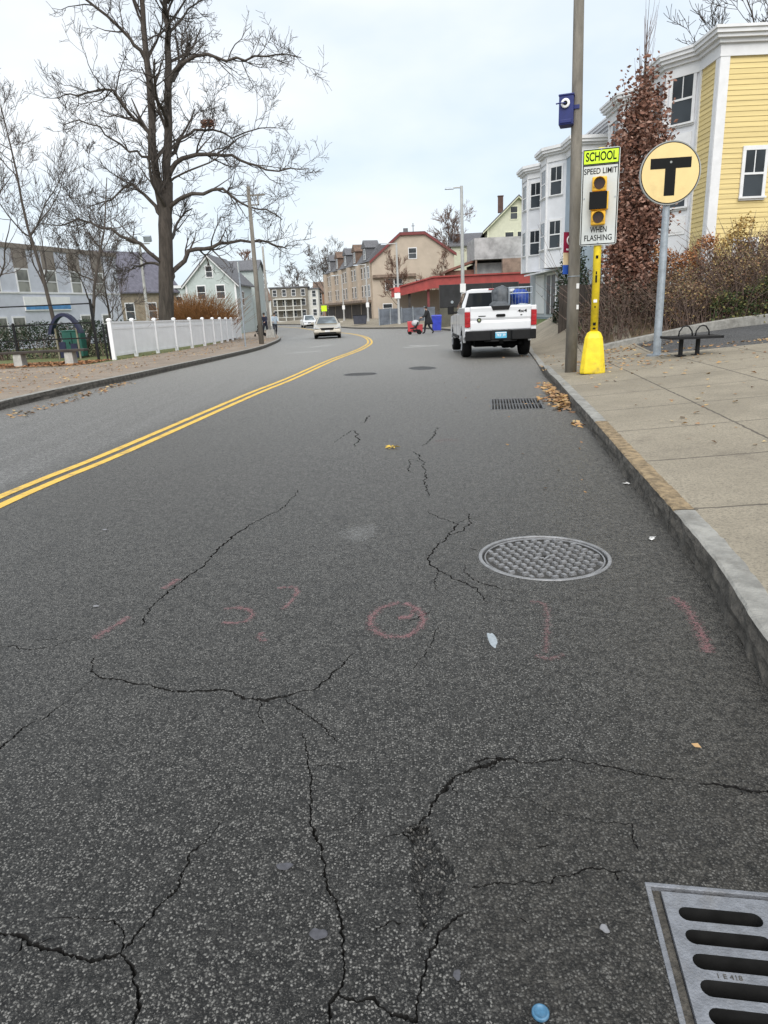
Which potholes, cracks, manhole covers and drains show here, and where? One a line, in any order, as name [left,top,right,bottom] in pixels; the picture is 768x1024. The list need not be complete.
crack [407,610,439,675]
manhole cover [479,536,612,581]
drain grate [645,882,768,1024]
crack [0,634,768,1024]
crack [427,512,522,603]
crack [142,490,298,626]
drain grate [490,398,545,410]
